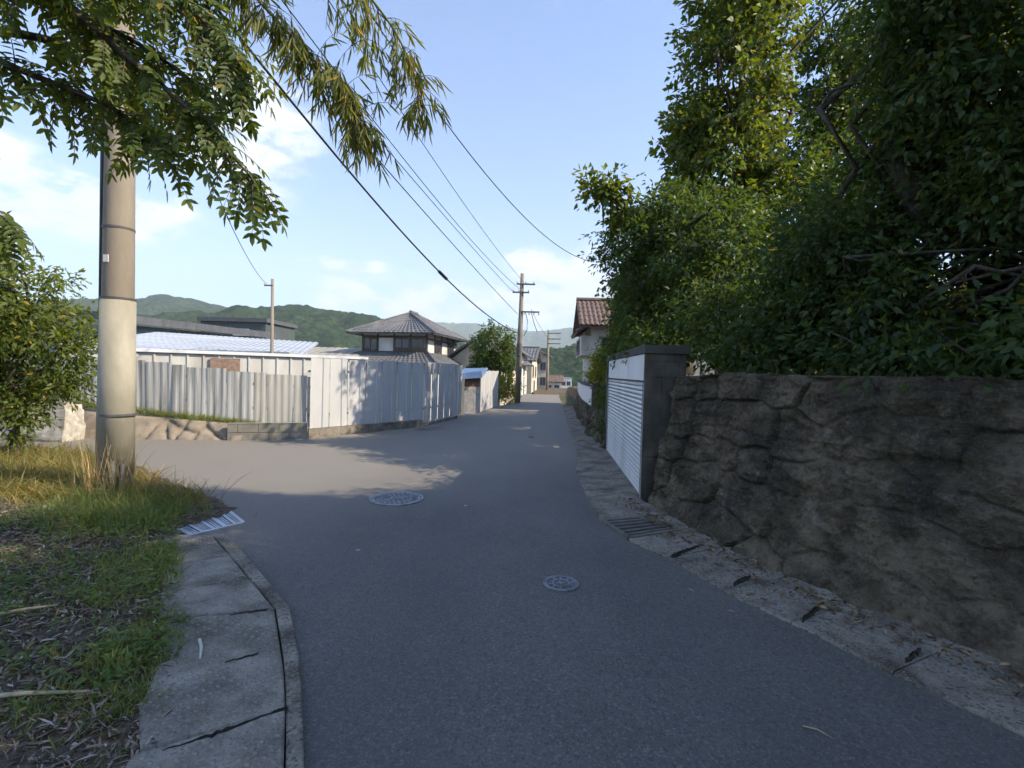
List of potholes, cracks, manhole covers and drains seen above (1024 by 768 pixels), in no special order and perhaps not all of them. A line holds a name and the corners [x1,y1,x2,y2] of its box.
crack [163,705,289,751]
drain grate [177,511,245,535]
drain grate [601,515,688,541]
manhole cover [543,575,579,592]
manhole cover [369,491,424,506]
